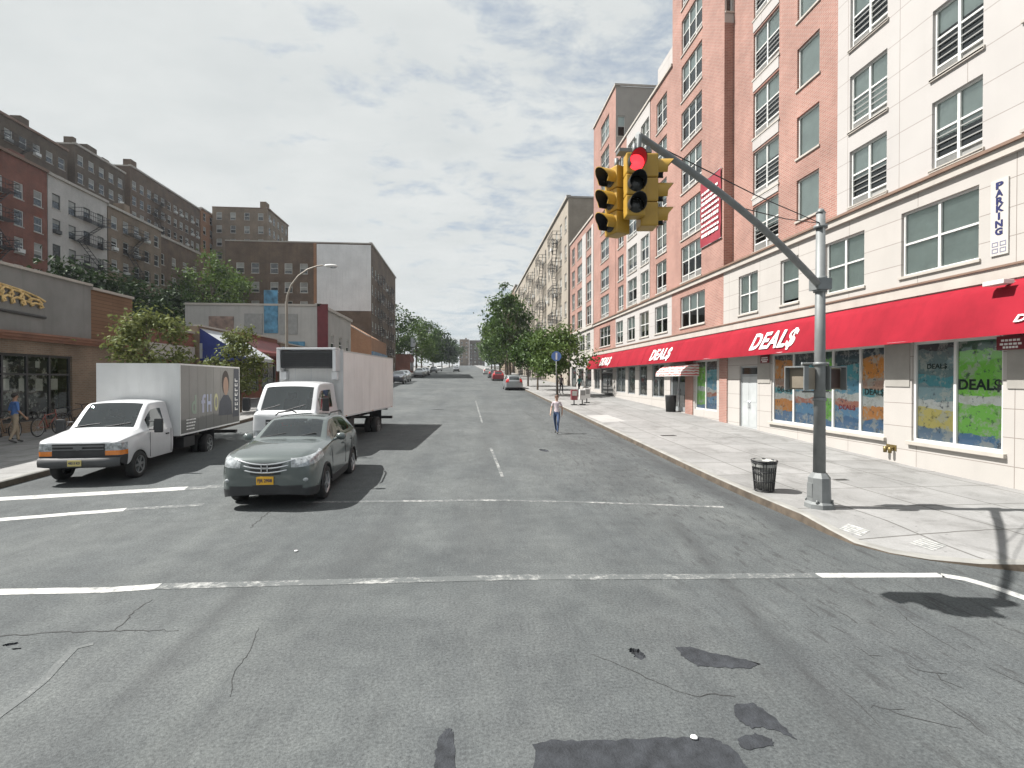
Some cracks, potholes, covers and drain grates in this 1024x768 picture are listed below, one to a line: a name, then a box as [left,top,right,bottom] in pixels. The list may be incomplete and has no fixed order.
pothole [628,648,646,660]
crack [839,665,981,731]
crack [2,601,178,636]
crack [593,654,735,697]
